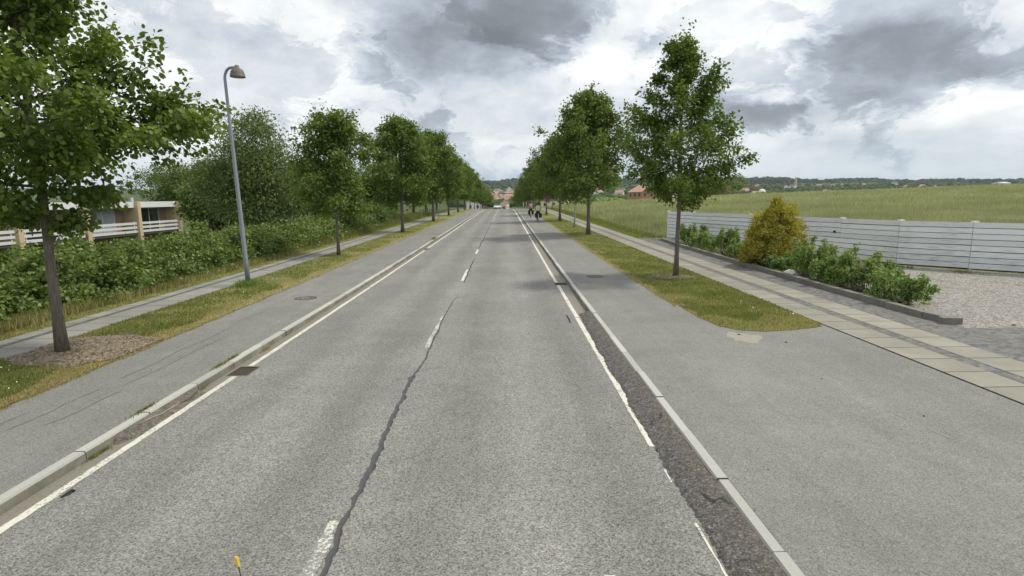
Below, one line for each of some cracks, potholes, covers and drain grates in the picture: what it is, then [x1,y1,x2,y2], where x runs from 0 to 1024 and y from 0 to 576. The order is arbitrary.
drain grate [227,366,260,376]
